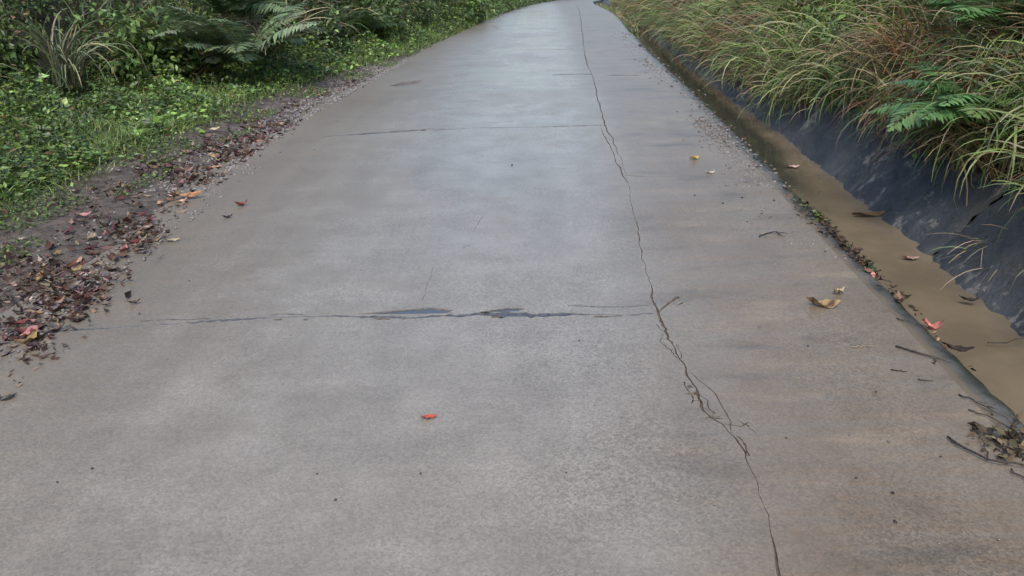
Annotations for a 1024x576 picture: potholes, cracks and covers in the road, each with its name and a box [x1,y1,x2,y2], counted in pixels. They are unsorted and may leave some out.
crack [327,5,781,576]
